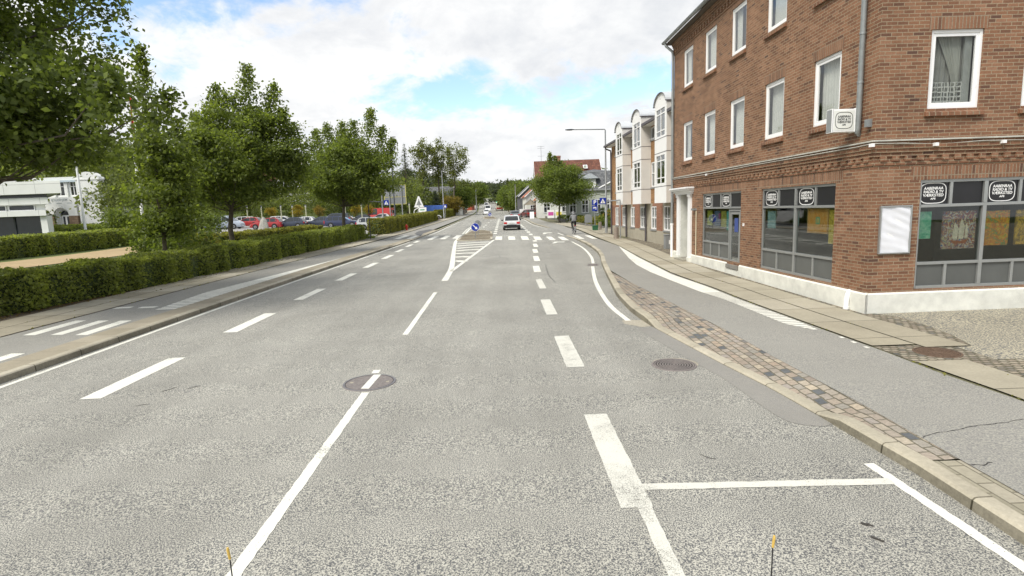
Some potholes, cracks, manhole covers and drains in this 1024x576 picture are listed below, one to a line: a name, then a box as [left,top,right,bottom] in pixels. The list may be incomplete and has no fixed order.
manhole cover [342,374,396,392]
crack [923,419,1022,438]
manhole cover [651,358,698,372]
manhole cover [912,347,964,358]
